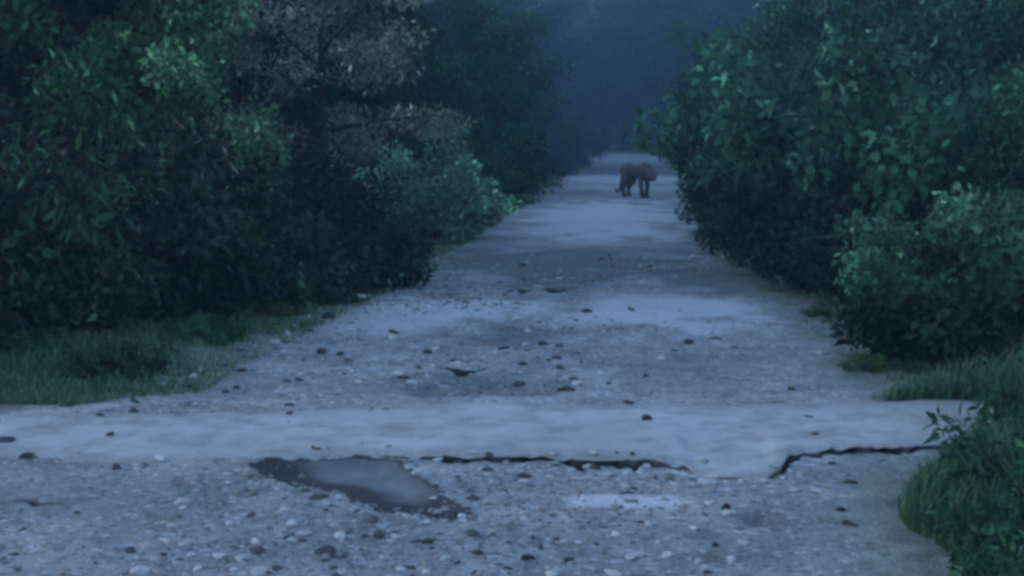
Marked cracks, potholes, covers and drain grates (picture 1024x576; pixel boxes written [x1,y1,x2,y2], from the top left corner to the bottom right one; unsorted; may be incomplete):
crack [441,449,919,479]
pothole [246,455,478,521]
